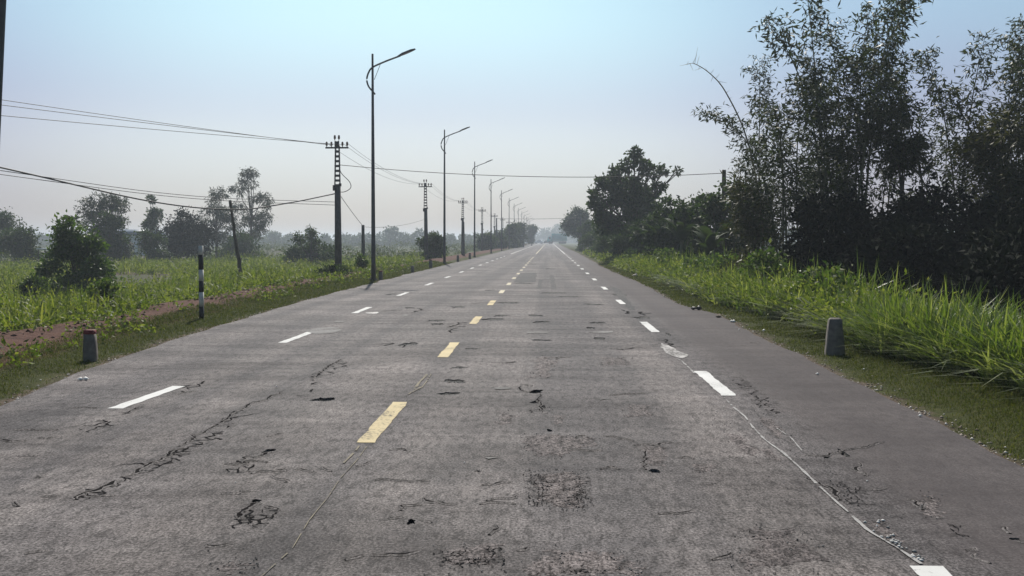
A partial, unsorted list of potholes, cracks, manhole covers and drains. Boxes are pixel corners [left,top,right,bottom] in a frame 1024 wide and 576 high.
crack [563,435,694,470]
crack [517,384,547,414]
crack [804,441,889,505]
crack [34,391,332,548]
crack [907,498,991,564]
crack [712,552,734,561]
crack [310,358,346,391]
crack [176,381,204,394]
